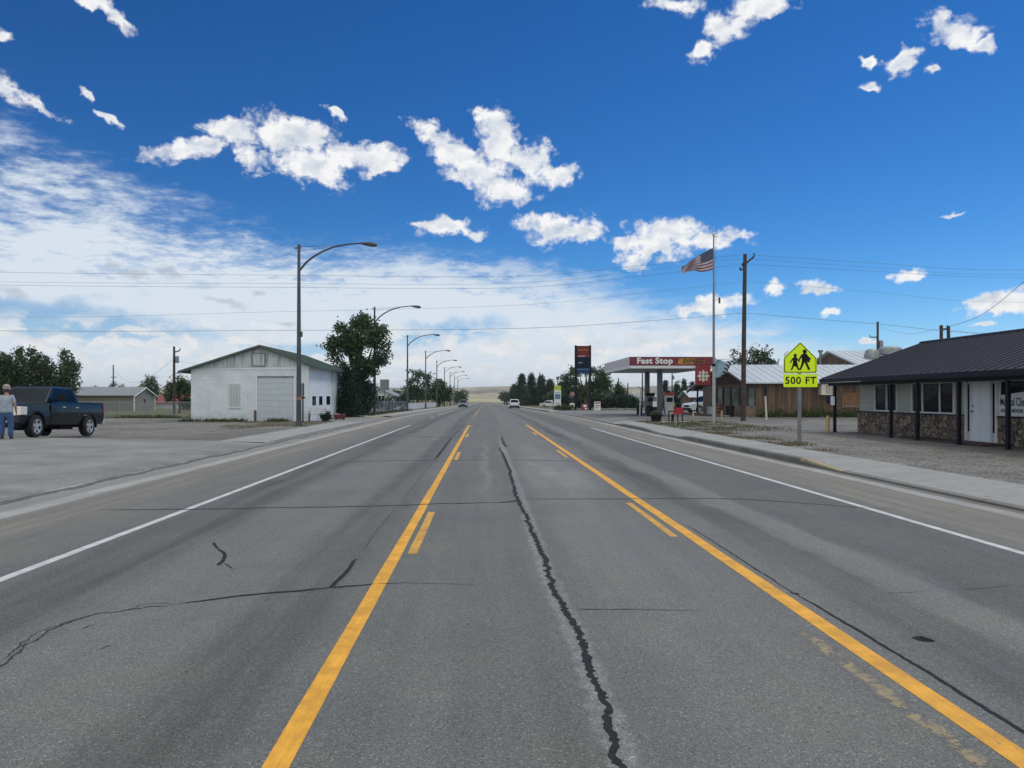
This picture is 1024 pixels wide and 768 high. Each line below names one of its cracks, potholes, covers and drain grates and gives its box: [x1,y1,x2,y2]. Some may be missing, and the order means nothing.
crack [0,558,452,666]
